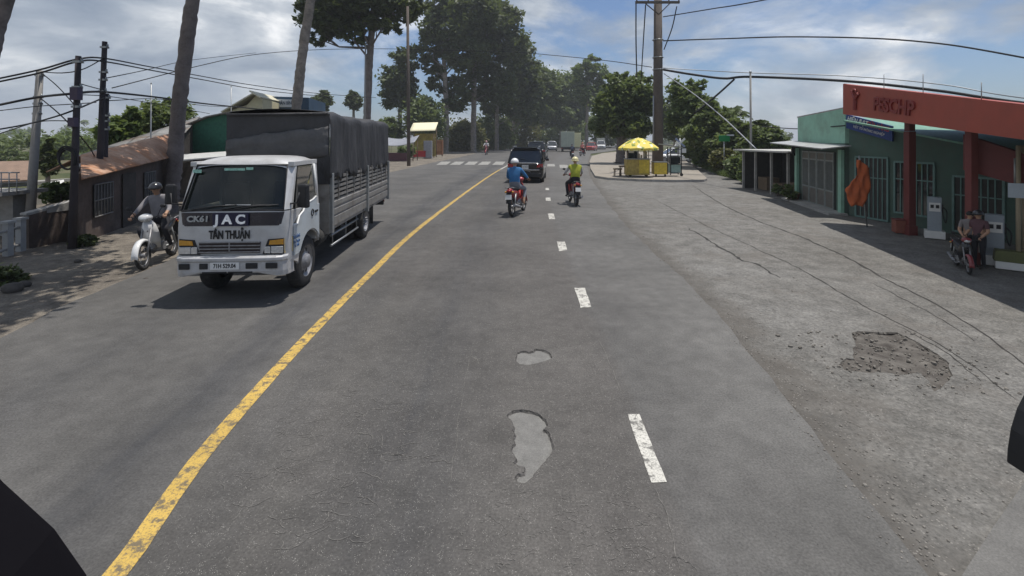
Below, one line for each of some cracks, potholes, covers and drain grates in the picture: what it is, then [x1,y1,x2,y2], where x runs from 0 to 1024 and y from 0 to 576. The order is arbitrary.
pothole [515,349,552,365]
pothole [506,409,554,483]
crack [658,184,1024,397]
